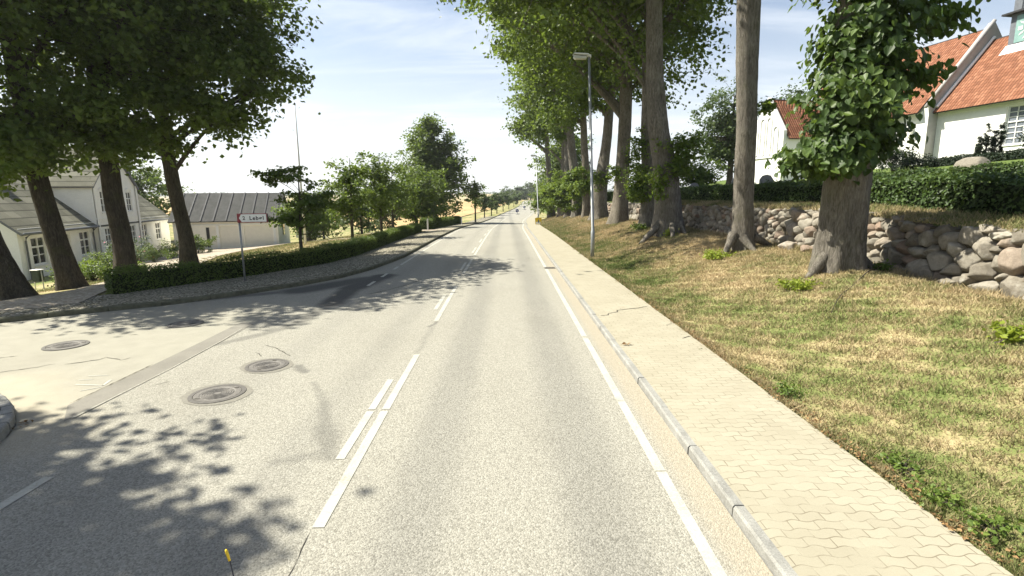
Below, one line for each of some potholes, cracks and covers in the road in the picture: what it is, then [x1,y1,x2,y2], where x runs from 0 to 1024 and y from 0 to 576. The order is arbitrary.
manhole cover [240,358,294,374]
manhole cover [41,340,90,351]
manhole cover [181,383,253,406]
